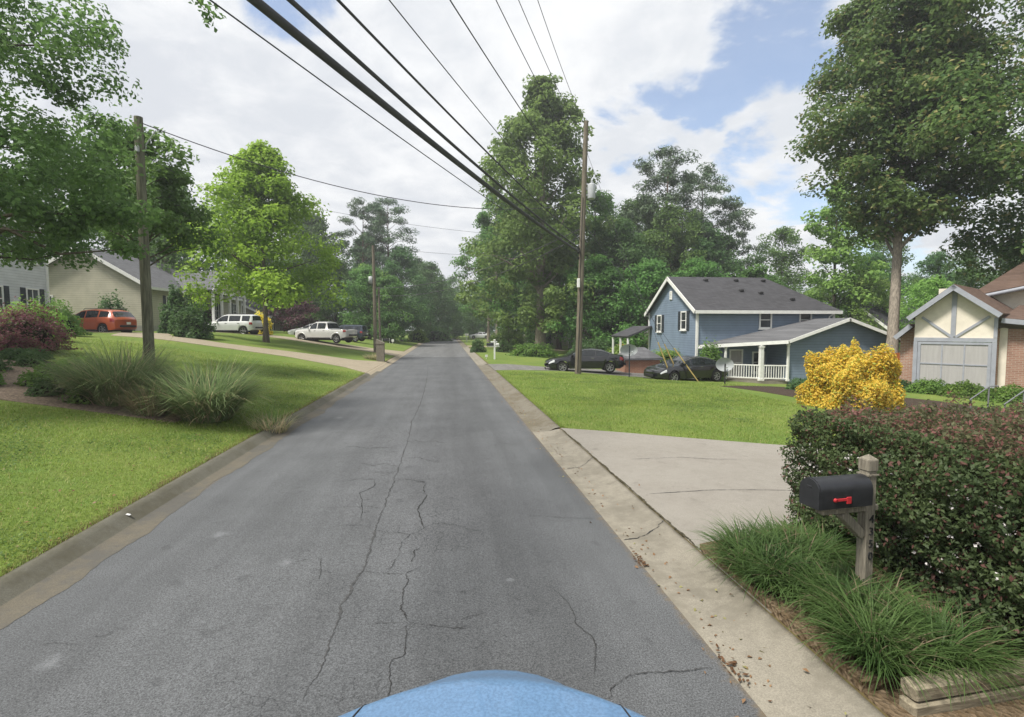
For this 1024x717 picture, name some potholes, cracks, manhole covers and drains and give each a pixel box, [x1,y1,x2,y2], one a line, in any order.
crack [368,485,491,697]
crack [552,588,706,698]
